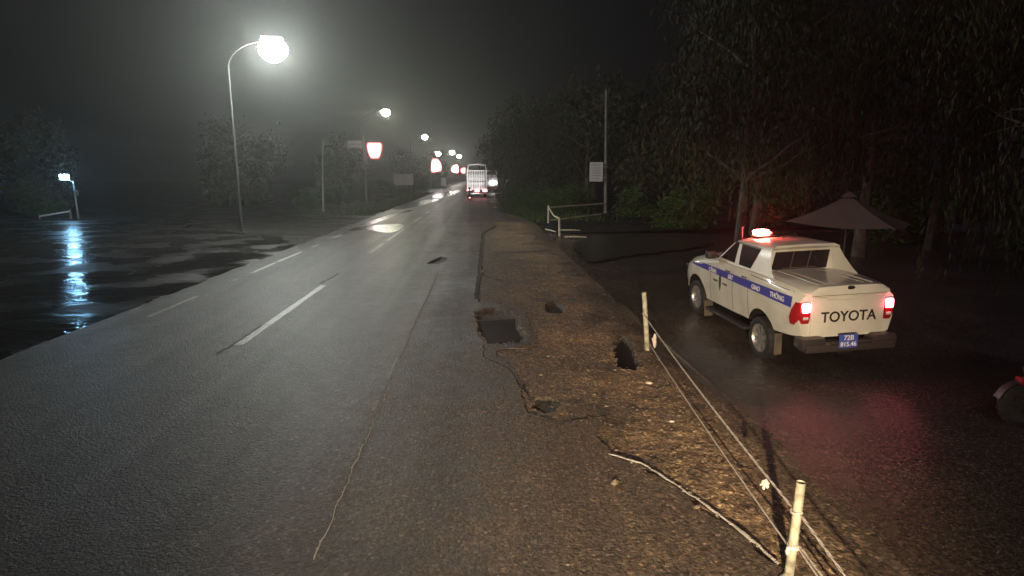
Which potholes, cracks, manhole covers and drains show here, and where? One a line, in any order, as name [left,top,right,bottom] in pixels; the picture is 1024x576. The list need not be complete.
crack [481,345,607,422]
pothole [531,396,564,414]
crack [608,453,779,565]
crack [474,226,502,299]
pothole [473,308,529,345]
pothole [611,336,645,370]
crack [312,266,441,560]
pothole [544,301,566,314]
